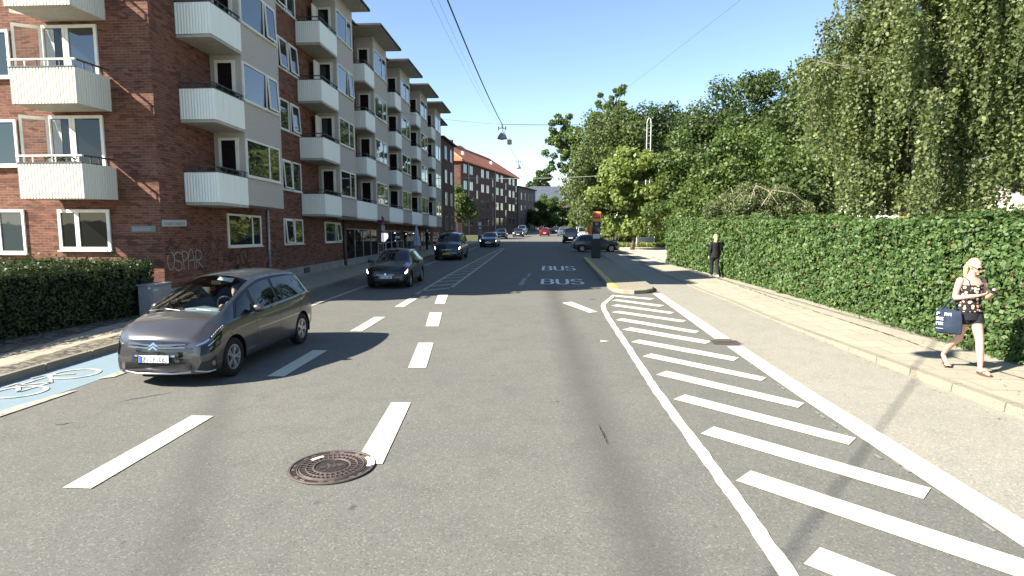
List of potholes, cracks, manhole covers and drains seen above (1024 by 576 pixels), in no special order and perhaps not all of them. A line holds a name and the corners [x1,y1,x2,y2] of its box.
manhole cover [287,450,375,485]
